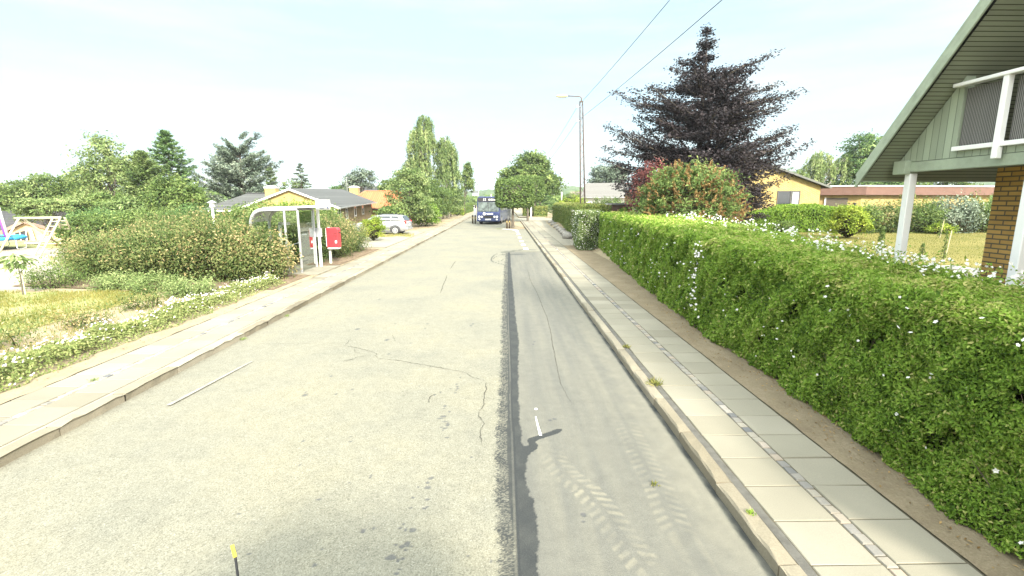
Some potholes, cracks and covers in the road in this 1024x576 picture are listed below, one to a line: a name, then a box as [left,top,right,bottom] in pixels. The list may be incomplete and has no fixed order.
crack [268,341,487,442]
